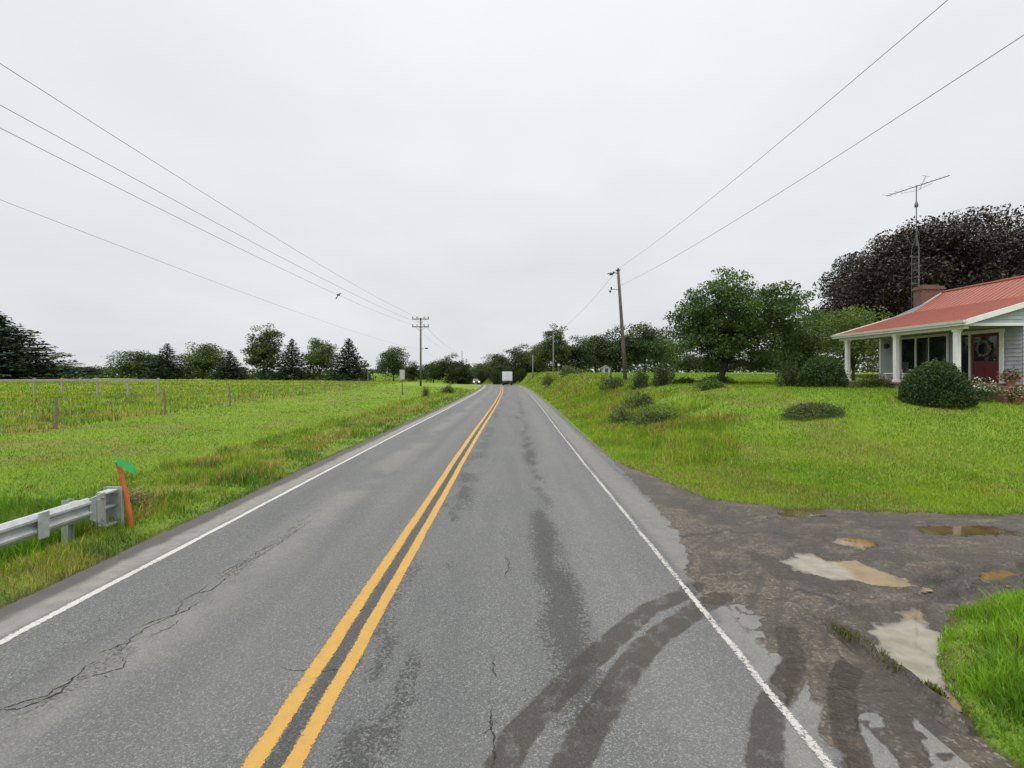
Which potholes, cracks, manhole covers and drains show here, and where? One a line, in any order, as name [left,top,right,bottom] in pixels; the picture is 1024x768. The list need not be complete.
crack [485,704,496,768]
pothole [978,570,1024,588]
pothole [765,508,826,518]
pothole [858,600,962,712]
pothole [776,547,932,595]
crack [0,514,321,710]
pothole [912,521,1024,537]
pothole [821,533,883,551]
